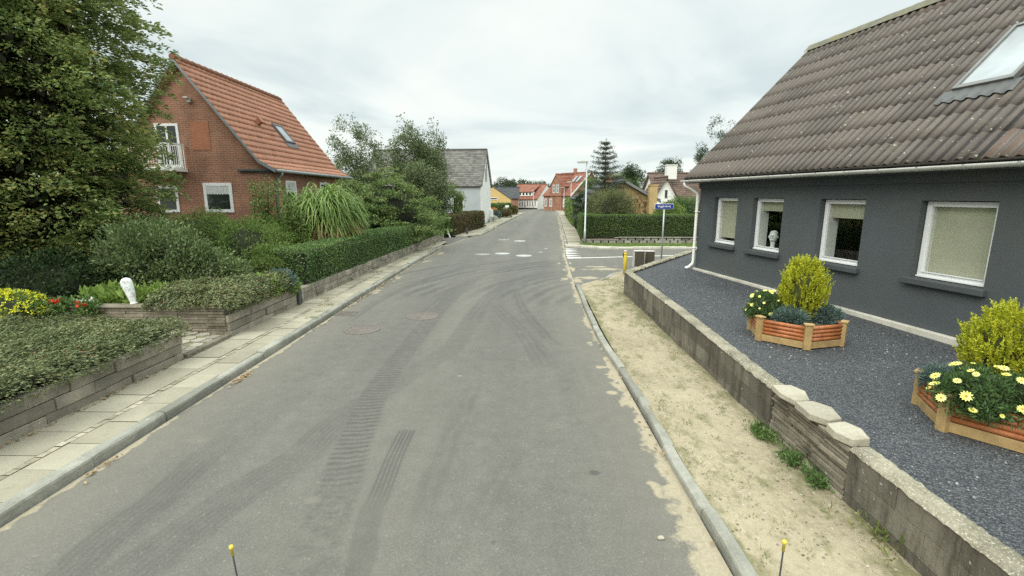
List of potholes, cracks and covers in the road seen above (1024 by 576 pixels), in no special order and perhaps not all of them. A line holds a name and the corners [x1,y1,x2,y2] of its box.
manhole cover [343,324,380,335]
manhole cover [407,312,439,320]
